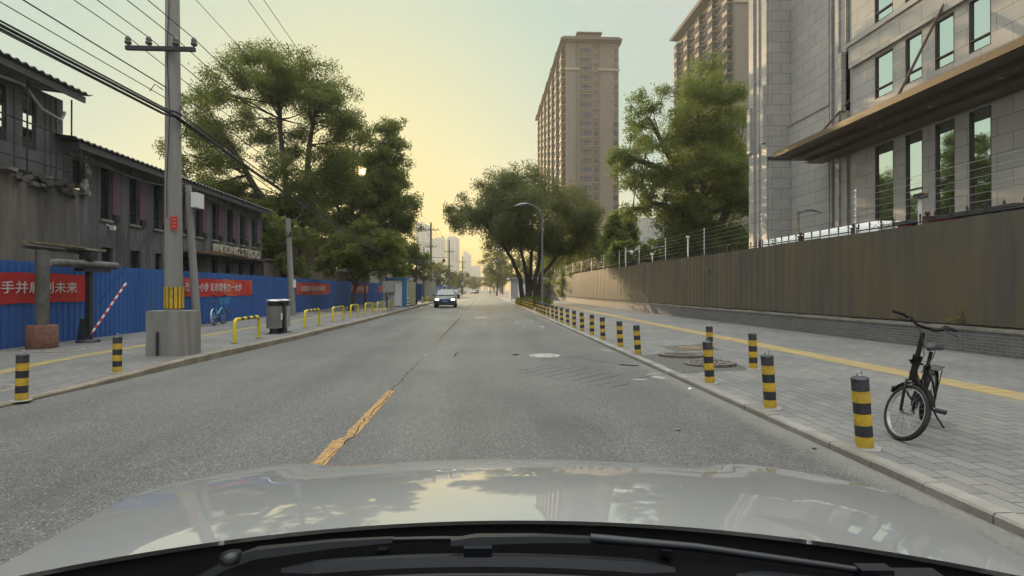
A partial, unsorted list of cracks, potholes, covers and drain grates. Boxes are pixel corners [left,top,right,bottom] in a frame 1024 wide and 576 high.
manhole cover [684,360,737,368]
crack [322,315,462,465]
